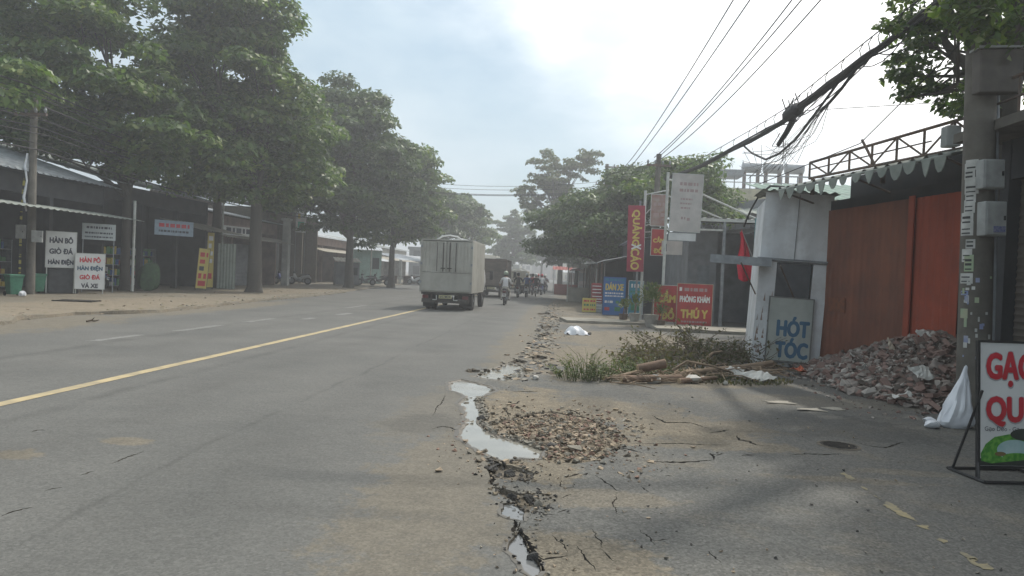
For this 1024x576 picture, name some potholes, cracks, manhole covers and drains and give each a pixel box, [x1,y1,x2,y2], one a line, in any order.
pothole [486,409,631,464]
pothole [448,379,549,460]
crack [488,461,506,487]
pothole [474,362,525,382]
crack [613,415,767,476]
manhole cover [816,440,862,454]
crack [511,473,620,573]
